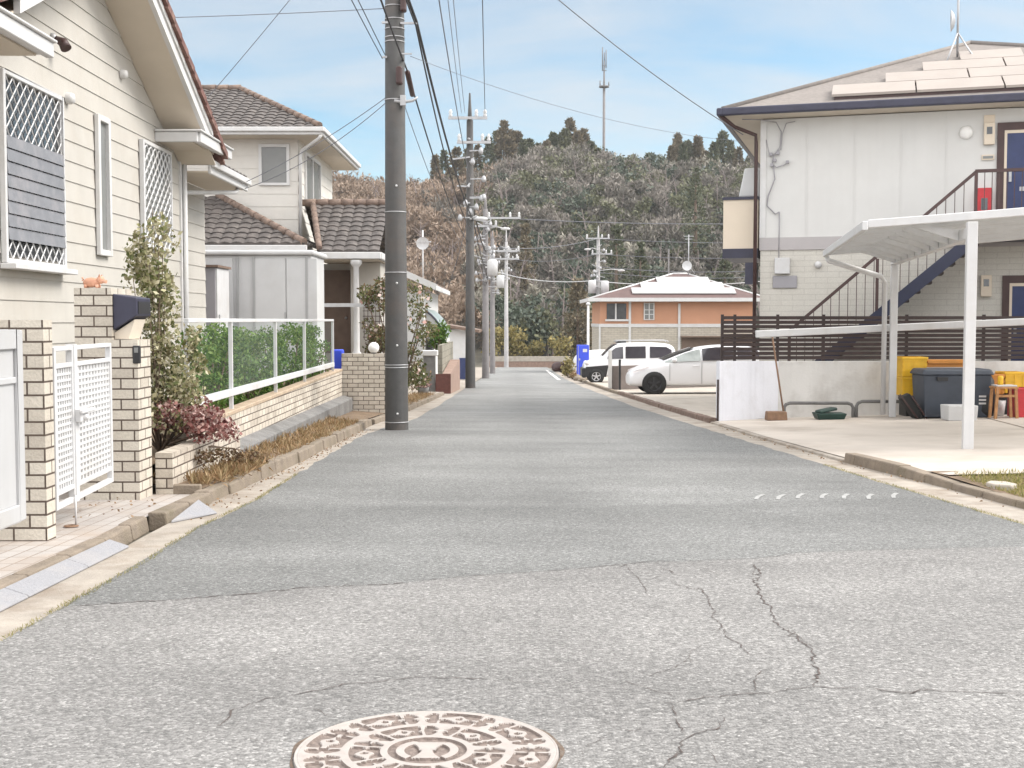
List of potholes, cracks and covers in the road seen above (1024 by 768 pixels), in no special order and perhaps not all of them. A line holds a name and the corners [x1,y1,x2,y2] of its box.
crack [216,676,673,743]
manhole cover [290,711,565,768]
crack [664,564,1014,767]
